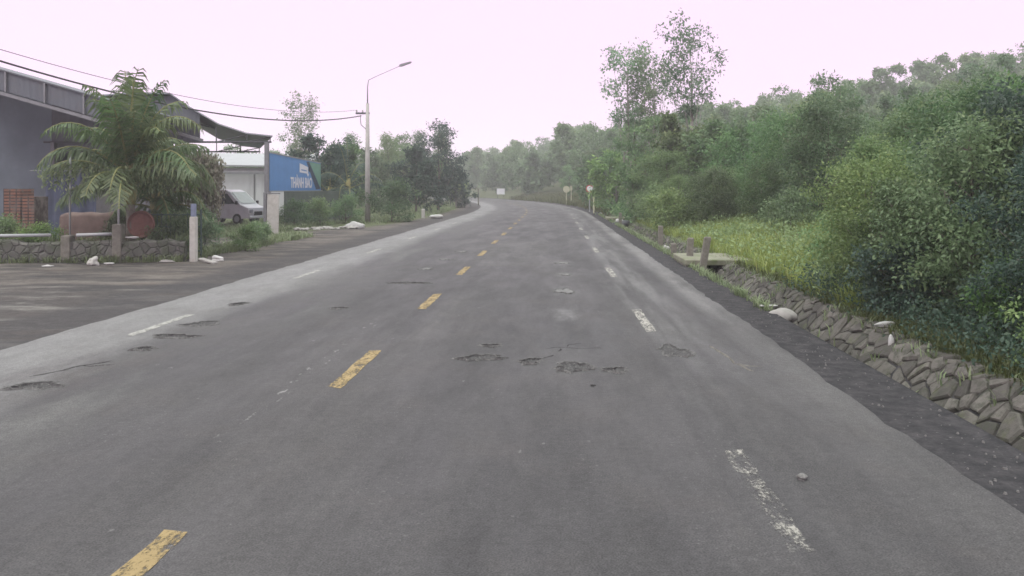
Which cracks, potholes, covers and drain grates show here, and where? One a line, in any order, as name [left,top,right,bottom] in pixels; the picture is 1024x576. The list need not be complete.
pothole [516,357,544,366]
pothole [450,354,509,362]
pothole [654,343,697,358]
pothole [552,361,598,374]
pothole [600,366,629,374]
pothole [0,380,66,390]
crack [29,361,110,377]
